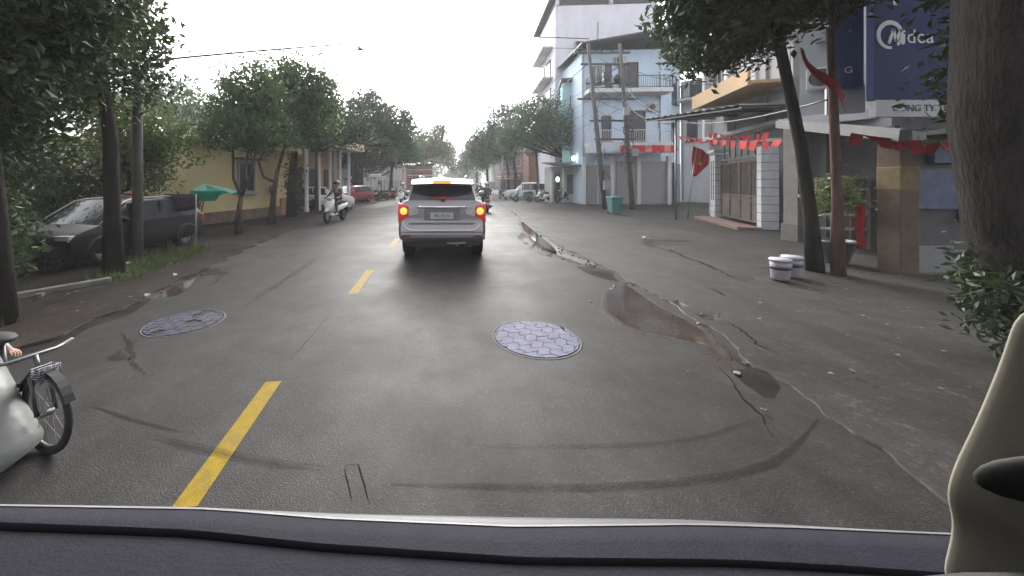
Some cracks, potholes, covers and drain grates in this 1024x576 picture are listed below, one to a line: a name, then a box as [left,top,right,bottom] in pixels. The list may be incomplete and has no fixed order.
manhole cover [492,320,583,360]
crack [719,323,786,437]
manhole cover [139,310,226,338]
pothole [142,273,206,301]
crack [669,250,731,296]
pothole [589,281,749,376]
pothole [519,219,598,268]
